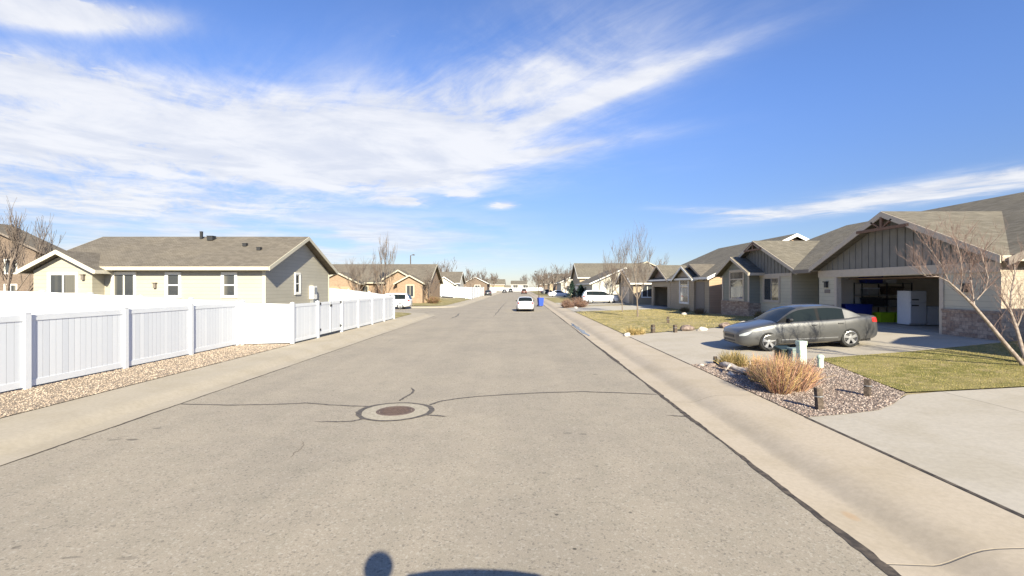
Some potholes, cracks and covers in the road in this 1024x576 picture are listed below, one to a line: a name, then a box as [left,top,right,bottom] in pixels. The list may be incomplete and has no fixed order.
manhole cover [362,403,429,420]
